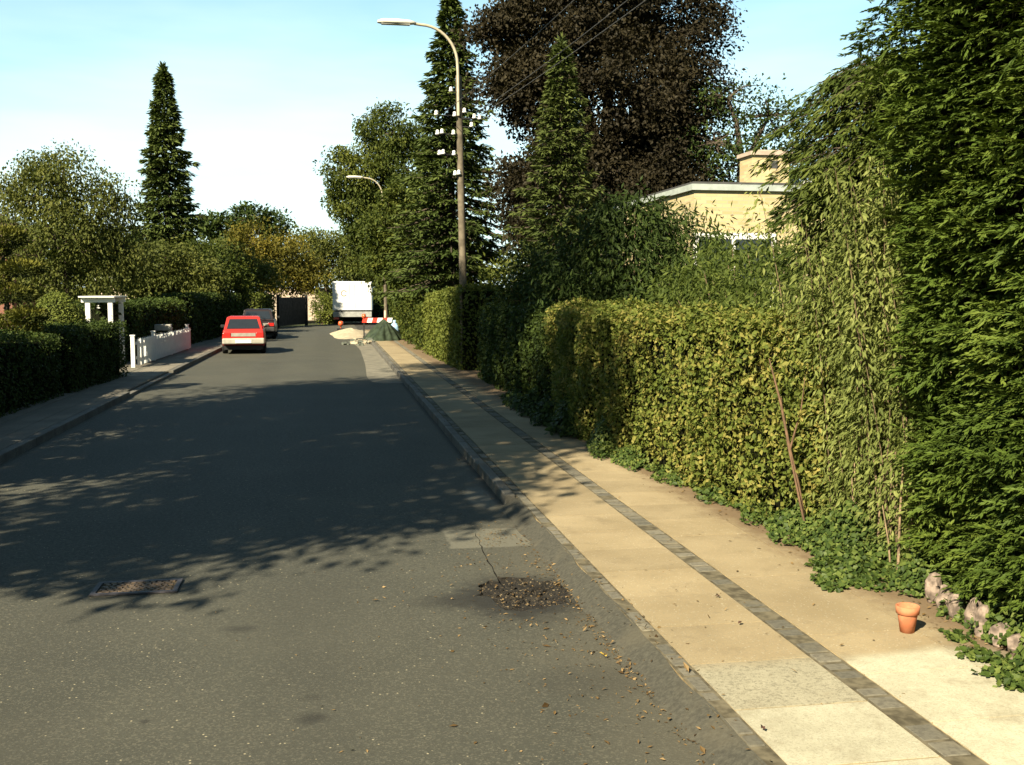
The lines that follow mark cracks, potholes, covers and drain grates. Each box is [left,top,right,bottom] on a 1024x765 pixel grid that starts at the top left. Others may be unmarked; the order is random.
pothole [477,577,570,611]
